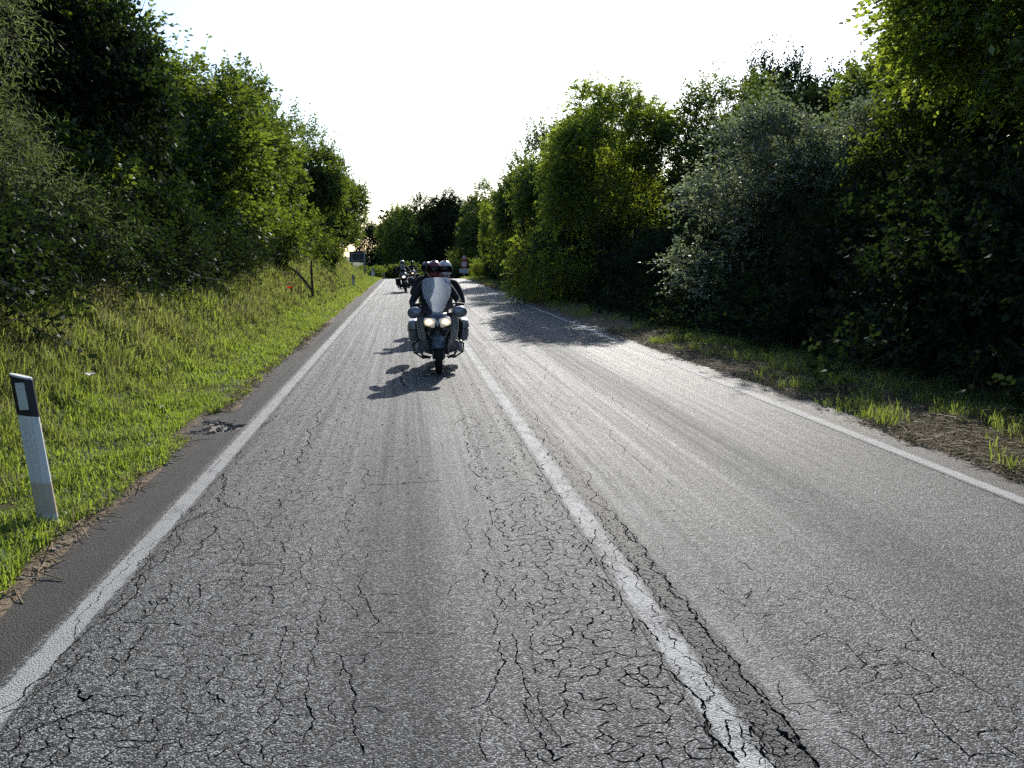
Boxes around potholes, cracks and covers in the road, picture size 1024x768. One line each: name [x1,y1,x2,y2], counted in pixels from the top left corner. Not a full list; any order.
crack [504,352,1024,768]
pothole [188,420,247,435]
crack [0,341,804,768]
